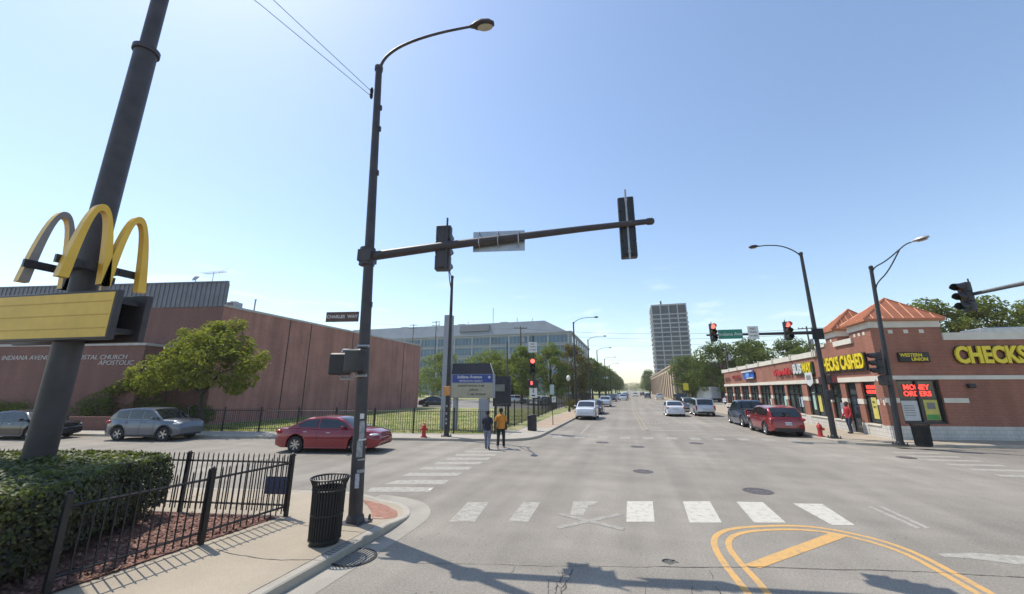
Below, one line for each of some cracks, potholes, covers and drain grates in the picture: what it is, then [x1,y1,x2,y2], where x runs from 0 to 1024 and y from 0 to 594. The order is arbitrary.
drain grate [325,539,377,567]
